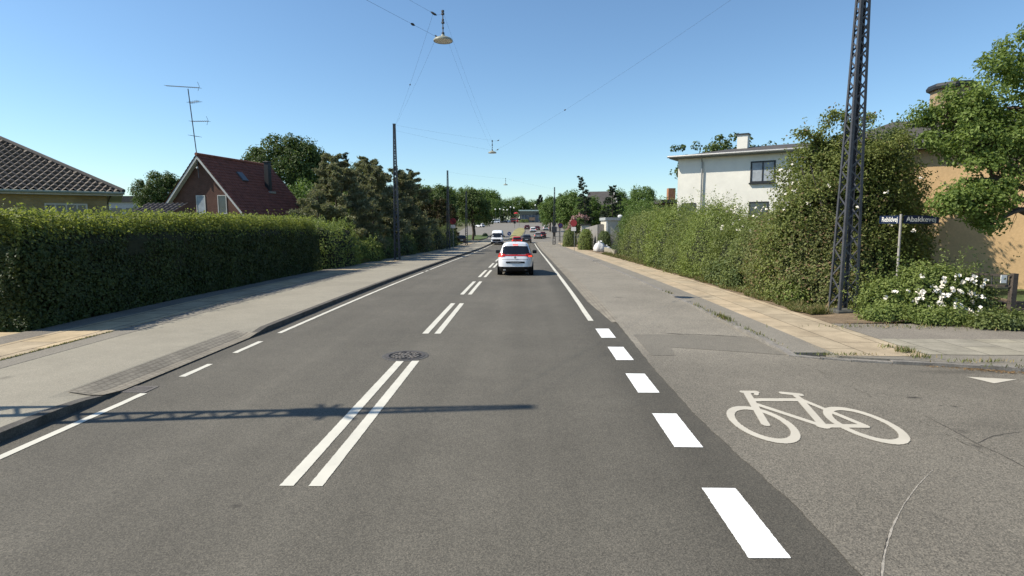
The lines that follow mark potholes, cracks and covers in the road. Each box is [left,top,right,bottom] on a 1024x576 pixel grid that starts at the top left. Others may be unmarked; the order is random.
crack [880,470,933,576]
manhole cover [382,350,429,361]
crack [922,414,1024,467]
